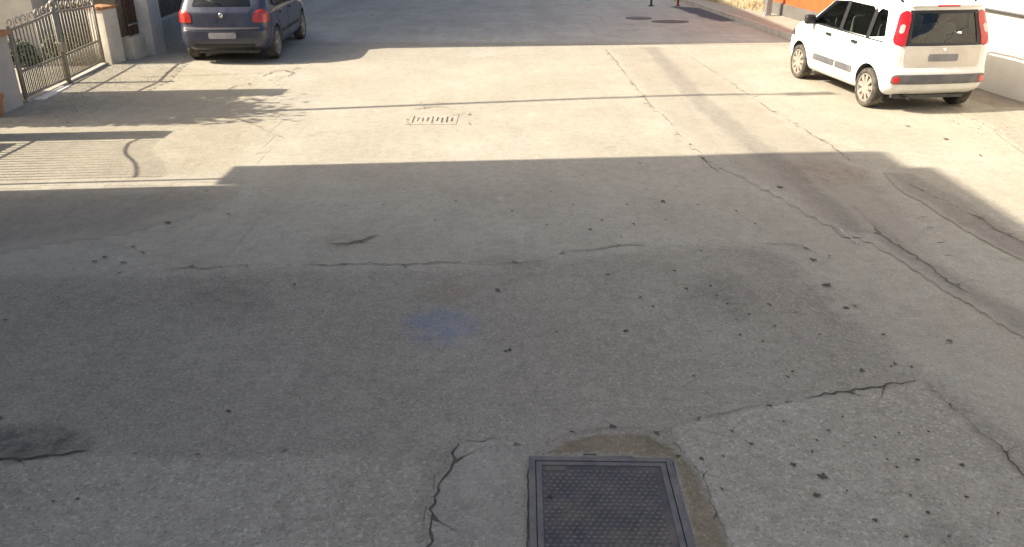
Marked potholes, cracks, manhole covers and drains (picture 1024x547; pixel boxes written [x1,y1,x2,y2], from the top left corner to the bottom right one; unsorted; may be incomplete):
crack [332,234,380,244]
crack [0,449,89,464]
manhole cover [529,456,695,547]
crack [426,437,526,547]
